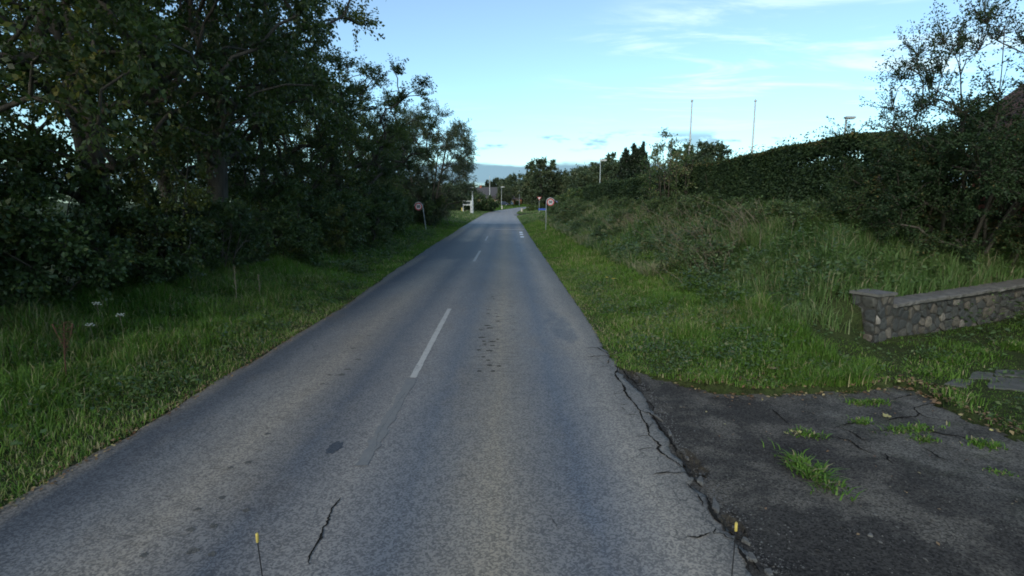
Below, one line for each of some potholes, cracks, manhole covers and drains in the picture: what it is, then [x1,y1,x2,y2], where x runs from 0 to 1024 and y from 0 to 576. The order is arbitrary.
crack [587,347,782,572]
crack [836,394,973,462]
crack [308,497,341,564]
